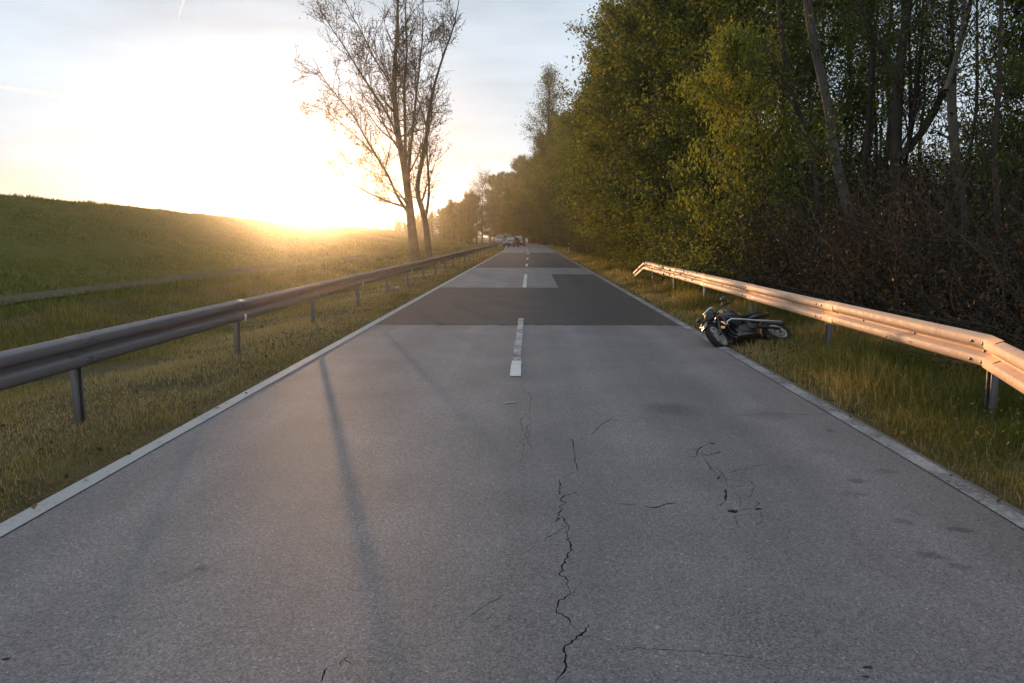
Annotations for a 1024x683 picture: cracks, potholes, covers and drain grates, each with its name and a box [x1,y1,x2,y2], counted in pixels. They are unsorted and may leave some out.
crack [605,647,764,660]
crack [689,443,769,527]
crack [545,419,620,682]
